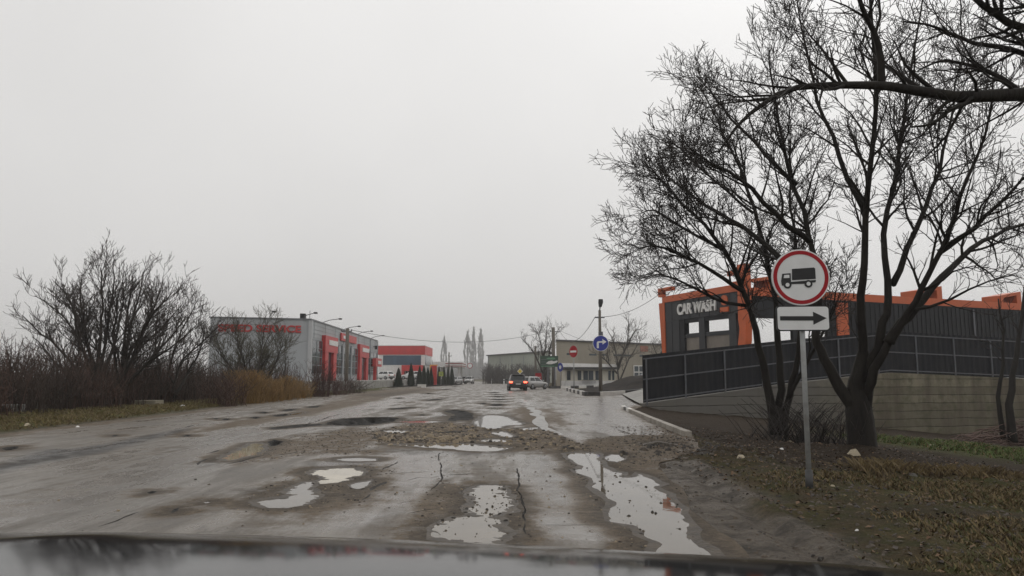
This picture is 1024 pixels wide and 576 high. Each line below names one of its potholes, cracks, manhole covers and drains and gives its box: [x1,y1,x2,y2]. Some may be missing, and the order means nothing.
pothole [305,466,368,484]
pothole [471,414,526,429]
crack [516,468,548,534]
pothole [387,443,513,452]
crack [362,453,474,514]
pothole [326,417,398,426]
pothole [216,442,269,461]
pothole [426,484,521,544]
pothole [248,480,326,509]
pothole [347,479,373,489]
pothole [560,452,725,556]
